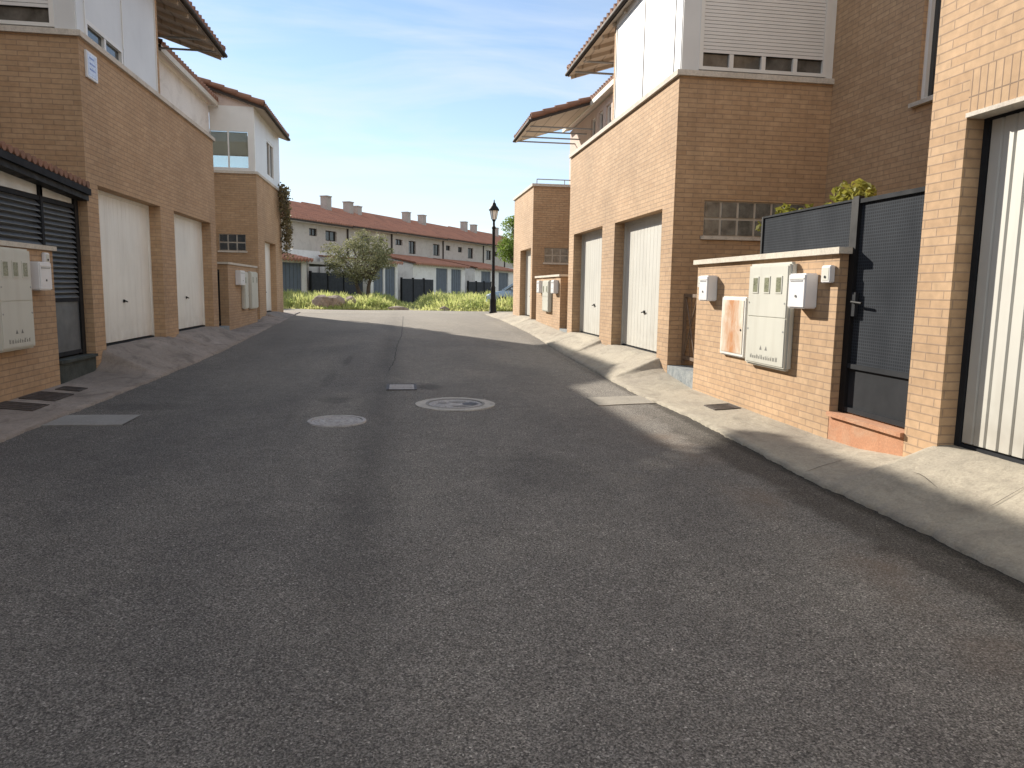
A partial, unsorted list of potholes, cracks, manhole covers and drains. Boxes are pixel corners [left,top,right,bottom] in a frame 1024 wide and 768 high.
utility cover [19,391,74,401]
manhole cover [307,415,366,427]
utility cover [0,401,50,411]
manhole cover [415,397,495,411]
